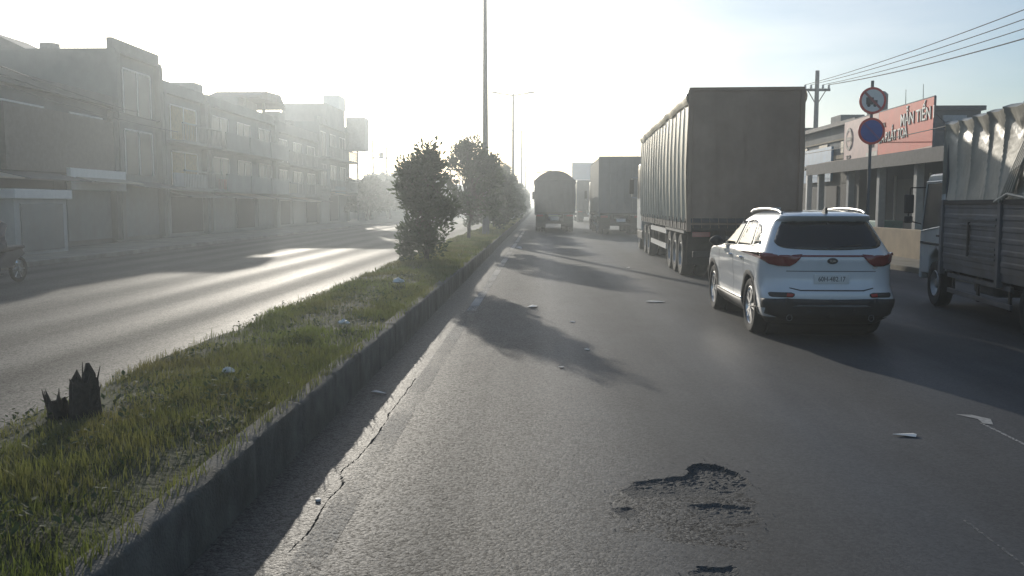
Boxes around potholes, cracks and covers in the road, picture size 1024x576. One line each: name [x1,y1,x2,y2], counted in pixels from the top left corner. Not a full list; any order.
crack [289,378,416,552]
pothole [620,463,752,498]
pothole [687,564,742,576]
